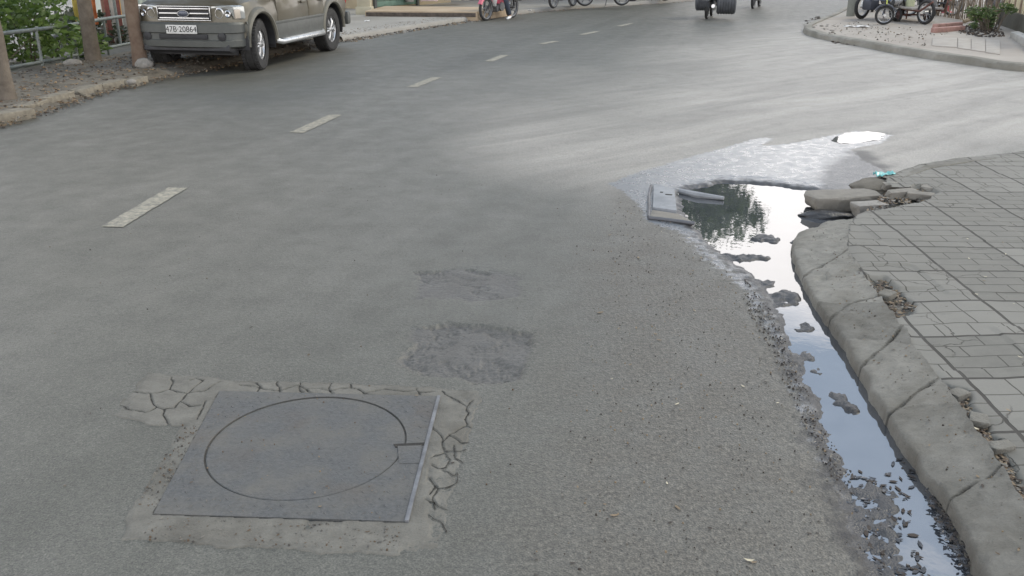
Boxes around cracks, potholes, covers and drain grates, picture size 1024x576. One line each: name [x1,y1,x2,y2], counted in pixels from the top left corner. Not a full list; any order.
manhole cover [153,391,441,523]
crack [250,381,472,532]
pothole [666,176,856,294]
crack [121,379,213,423]
